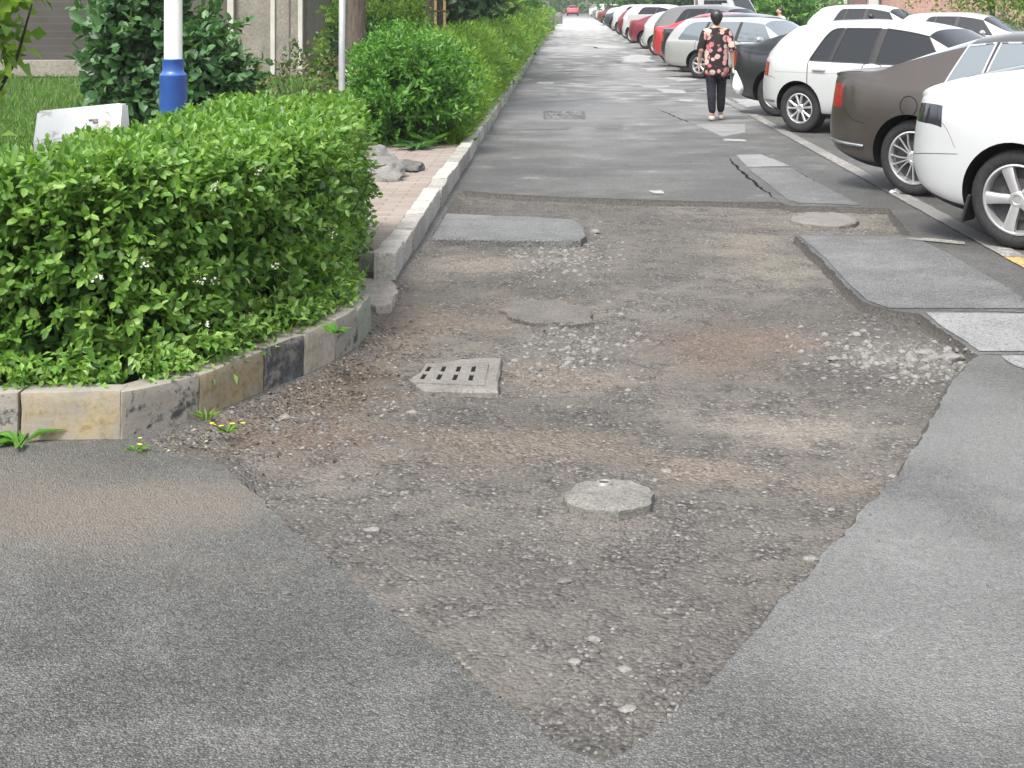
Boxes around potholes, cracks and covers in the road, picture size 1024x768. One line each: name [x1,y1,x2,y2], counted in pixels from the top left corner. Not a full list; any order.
manhole cover [790,212,859,229]
drain grate [409,358,502,398]
crack [730,158,775,199]
pothole [141,190,978,762]
manhole cover [563,479,655,521]
